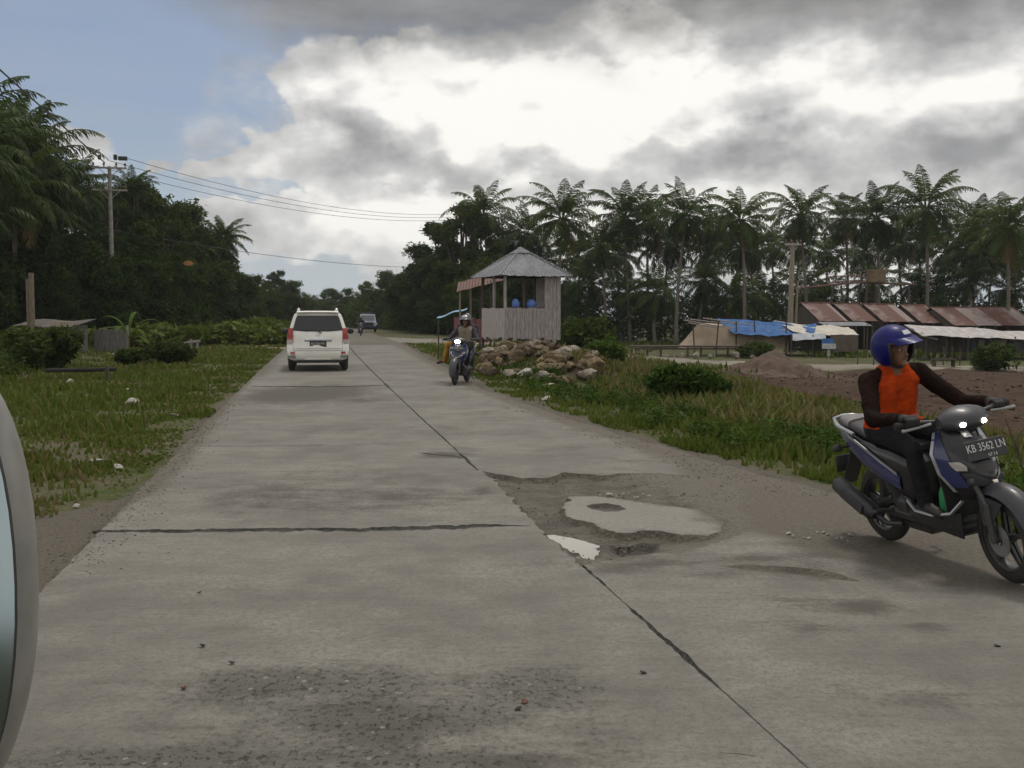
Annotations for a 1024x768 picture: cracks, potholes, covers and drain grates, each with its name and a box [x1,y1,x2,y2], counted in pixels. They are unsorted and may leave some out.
pothole [483,471,754,566]
